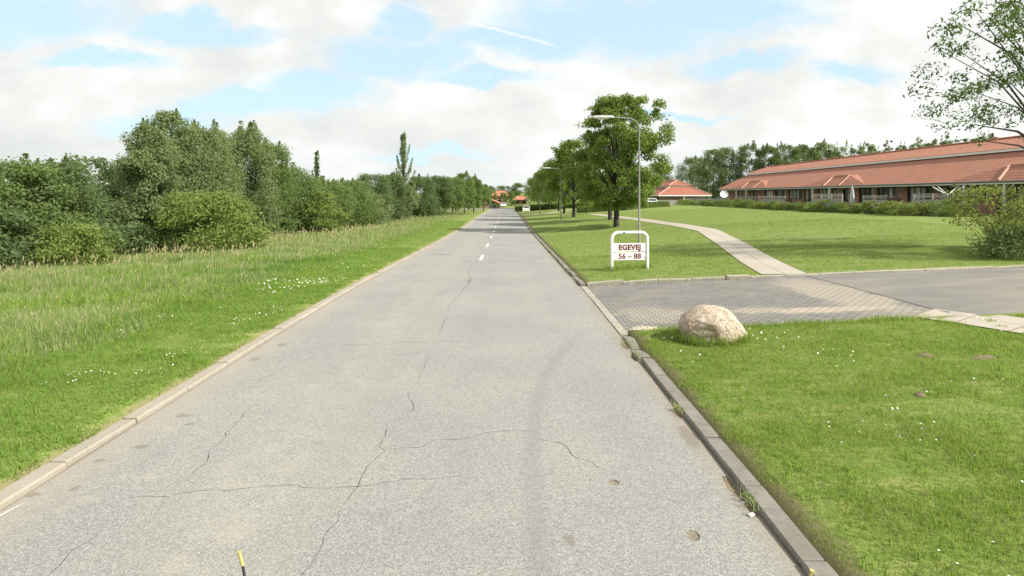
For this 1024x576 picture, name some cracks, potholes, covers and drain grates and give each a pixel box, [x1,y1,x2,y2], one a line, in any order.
crack [114,321,602,575]
pothole [686,530,701,541]
